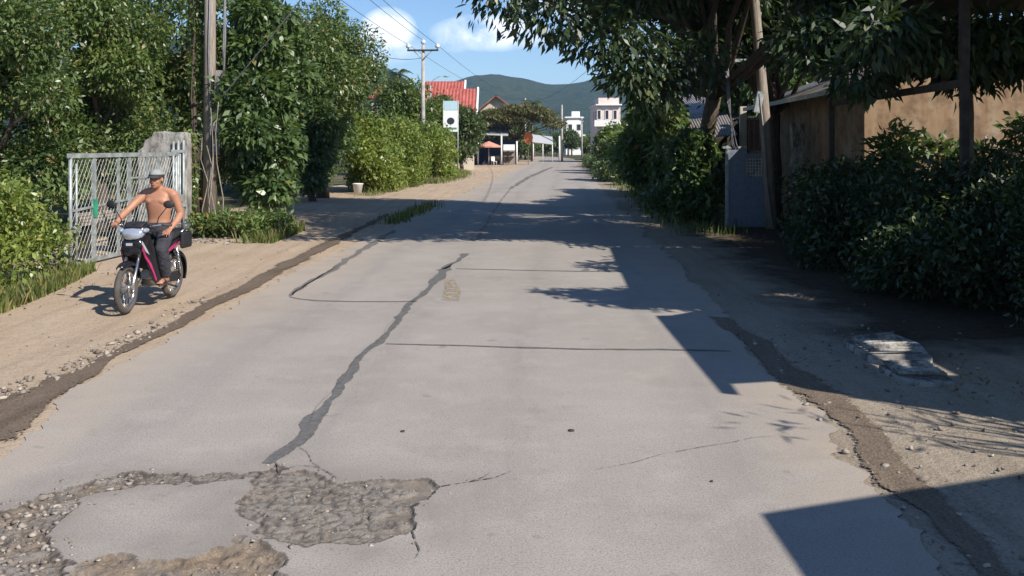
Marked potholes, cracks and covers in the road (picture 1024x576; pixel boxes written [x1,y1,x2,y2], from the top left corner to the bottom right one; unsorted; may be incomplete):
pothole [141,470,257,487]
crack [411,471,510,558]
pothole [0,470,152,576]
pothole [67,535,290,576]
pothole [234,464,440,548]
